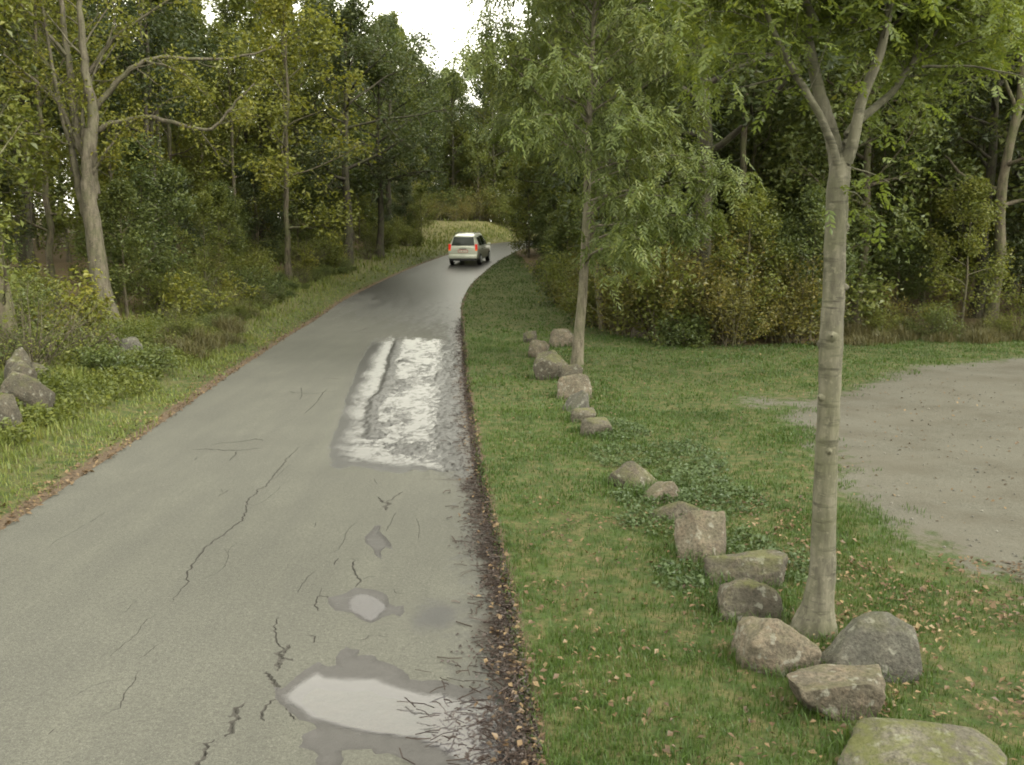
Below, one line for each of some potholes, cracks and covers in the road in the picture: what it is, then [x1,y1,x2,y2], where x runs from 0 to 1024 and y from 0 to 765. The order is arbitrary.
crack [374,479,402,532]
pothole [365,525,393,560]
crack [191,438,262,461]
pothole [328,587,405,623]
crack [80,448,298,716]
pothole [273,647,523,765]
crack [334,526,374,587]
crack [194,618,316,765]
crack [298,571,328,611]
